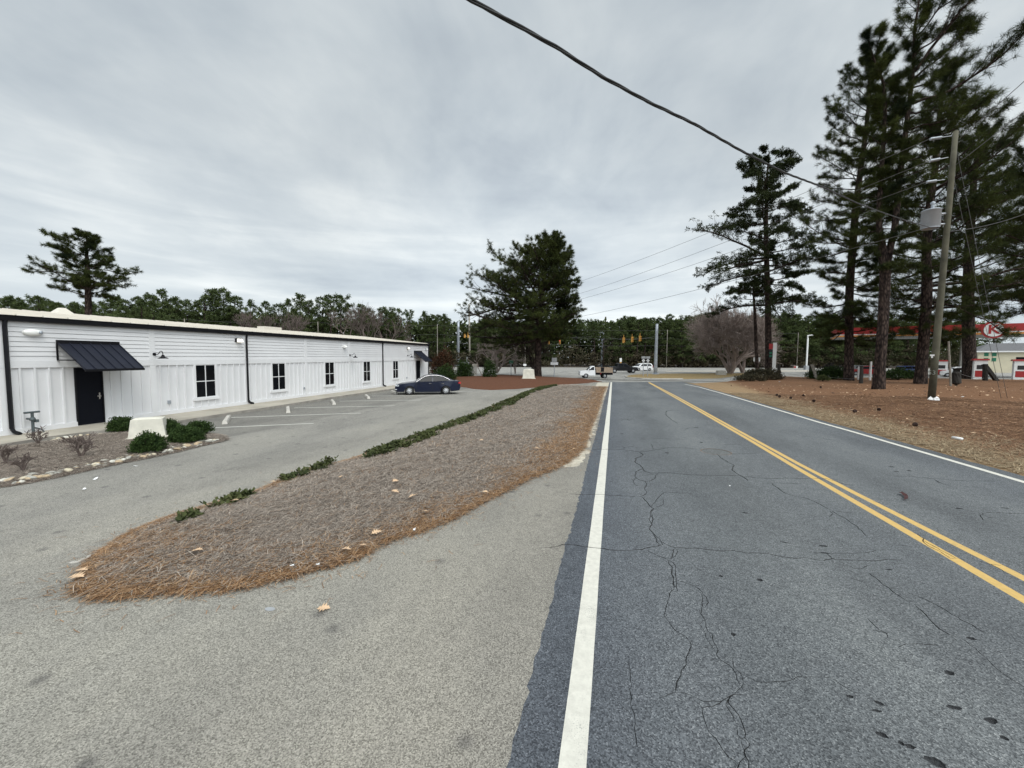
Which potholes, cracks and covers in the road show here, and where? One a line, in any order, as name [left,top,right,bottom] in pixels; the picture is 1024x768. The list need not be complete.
crack [549,444,1023,768]
